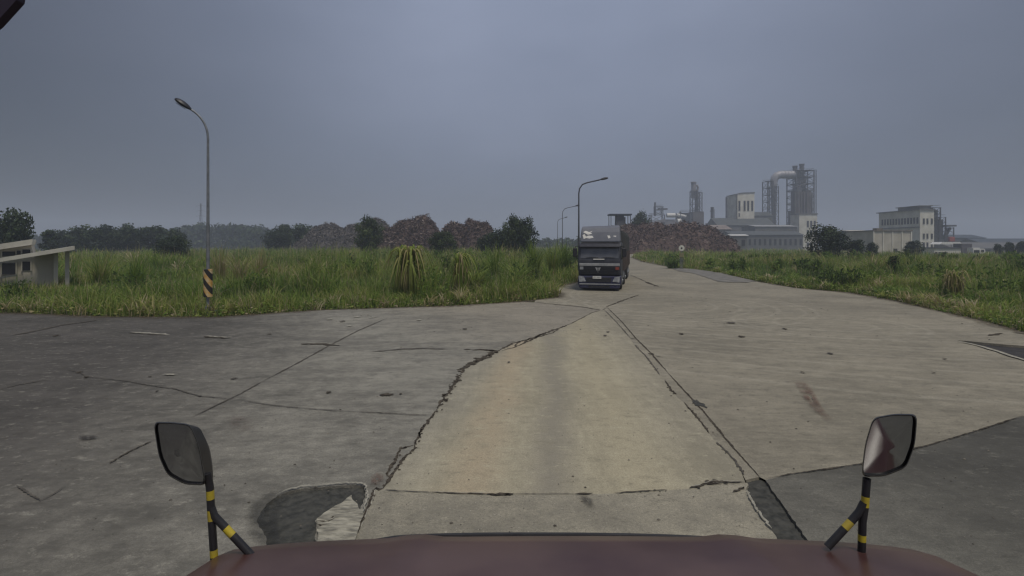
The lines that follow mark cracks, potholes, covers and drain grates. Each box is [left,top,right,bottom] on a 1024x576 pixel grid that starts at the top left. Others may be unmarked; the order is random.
crack [16,485,60,500]
pothole [257,487,365,545]
crack [357,302,600,533]
